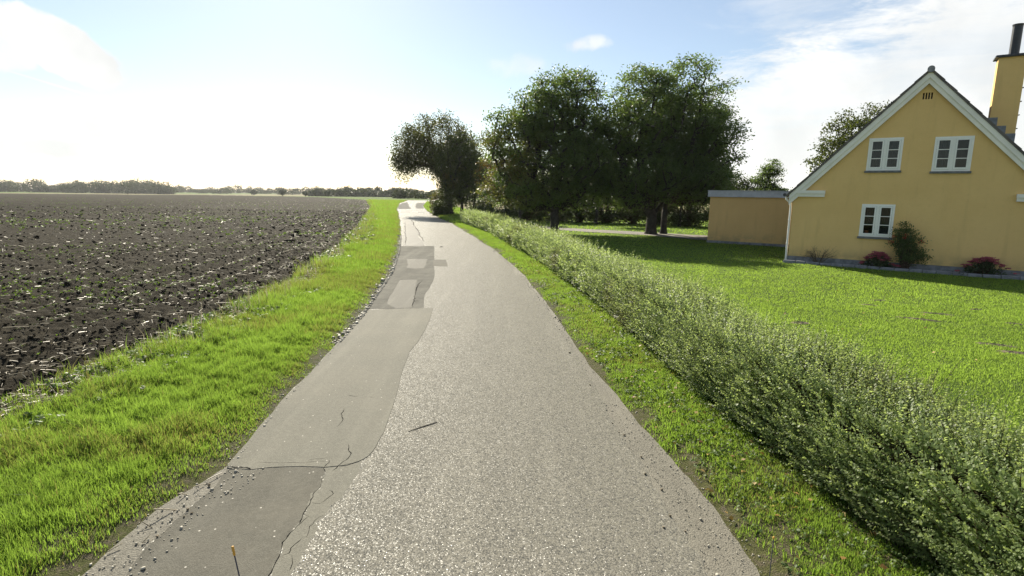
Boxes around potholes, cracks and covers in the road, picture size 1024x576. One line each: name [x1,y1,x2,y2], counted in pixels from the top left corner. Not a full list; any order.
crack [232,445,362,576]
